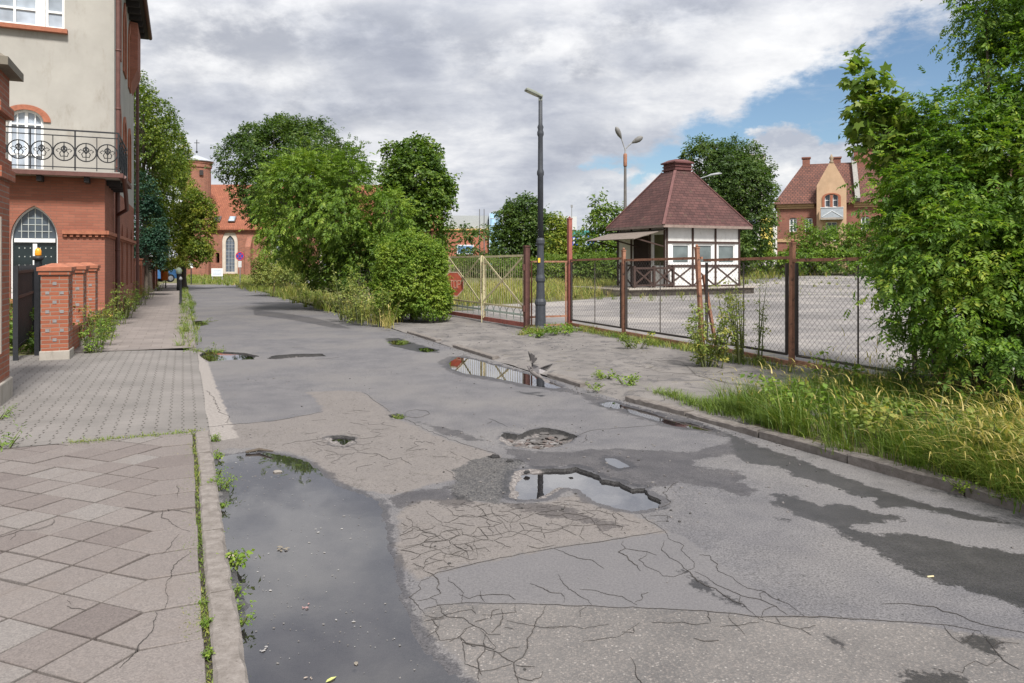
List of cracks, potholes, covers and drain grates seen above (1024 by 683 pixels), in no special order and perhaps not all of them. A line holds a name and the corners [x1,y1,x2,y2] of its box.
pothole [325,435,356,447]
pothole [498,427,577,450]
pothole [200,350,259,362]
crack [885,603,1022,673]
crack [401,482,816,683]
pothole [508,467,661,512]
crack [207,390,477,480]
